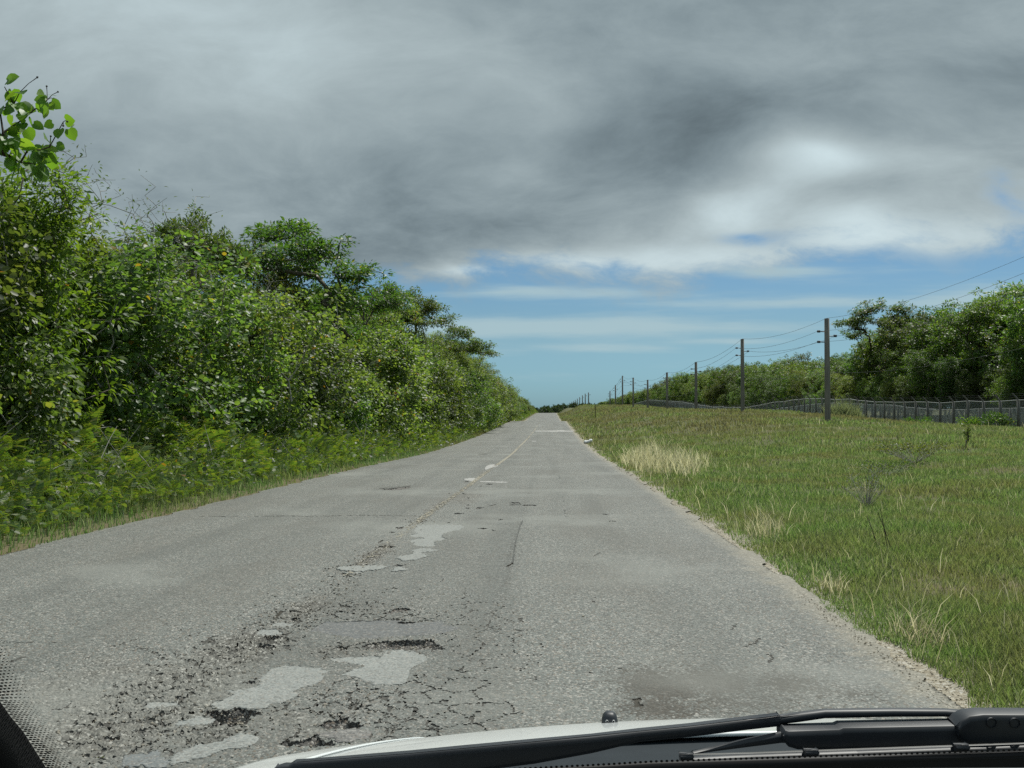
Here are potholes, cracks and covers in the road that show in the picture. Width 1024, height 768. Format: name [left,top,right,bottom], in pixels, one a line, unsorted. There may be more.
crack [267,595,538,742]
crack [731,624,774,663]
pothole [204,707,263,730]
pothole [279,734,335,747]
crack [64,587,440,765]
pothole [361,638,445,652]
